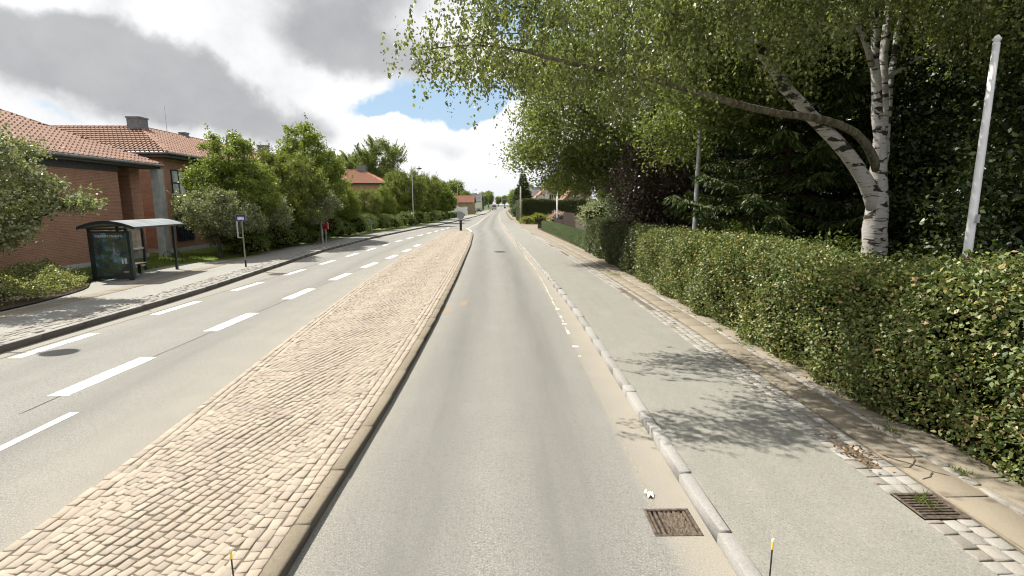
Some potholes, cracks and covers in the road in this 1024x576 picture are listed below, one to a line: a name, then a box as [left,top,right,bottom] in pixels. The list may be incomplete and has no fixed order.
drain grate [890,493,971,520]
drain grate [643,508,704,537]
crack [883,452,947,479]
